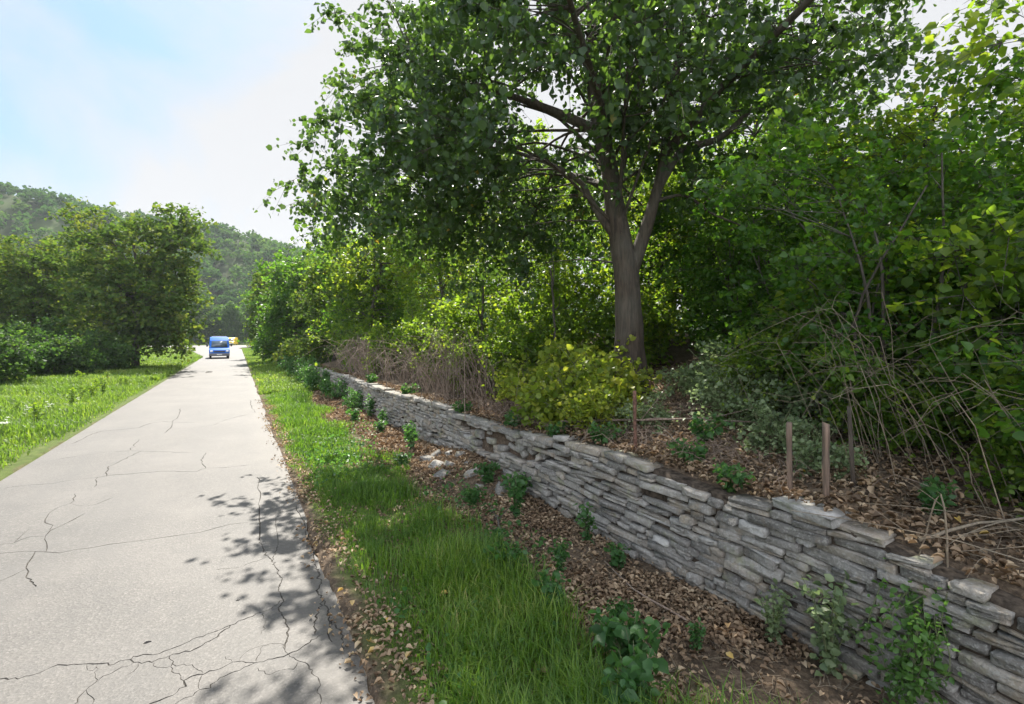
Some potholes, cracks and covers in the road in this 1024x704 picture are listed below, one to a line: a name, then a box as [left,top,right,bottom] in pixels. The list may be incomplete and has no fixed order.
crack [8,402,255,587]
crack [0,477,344,704]
